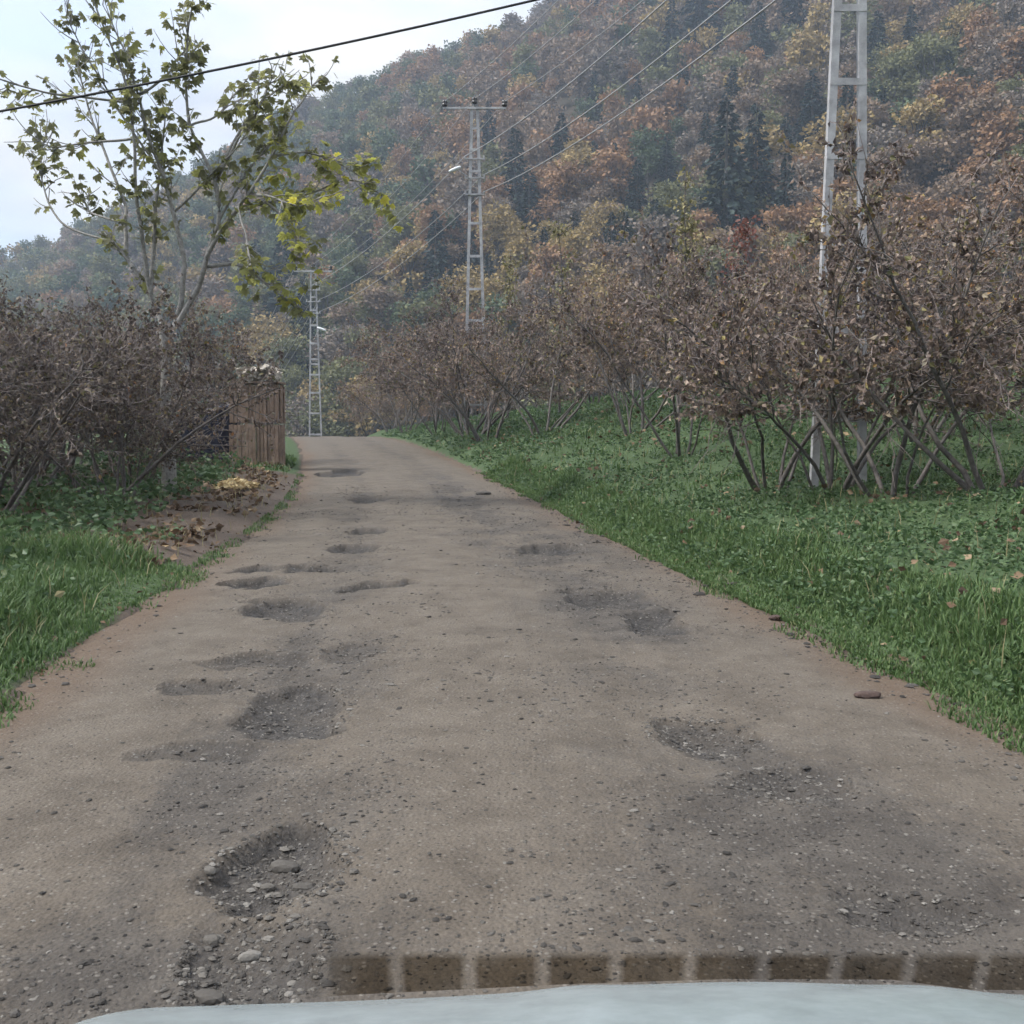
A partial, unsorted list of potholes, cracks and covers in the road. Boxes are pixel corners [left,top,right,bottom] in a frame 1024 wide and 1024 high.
pothole [321,543,385,554]
pothole [114,739,274,767]
pothole [330,578,425,594]
pothole [313,469,366,478]
pothole [174,819,352,921]
pothole [555,587,658,612]
